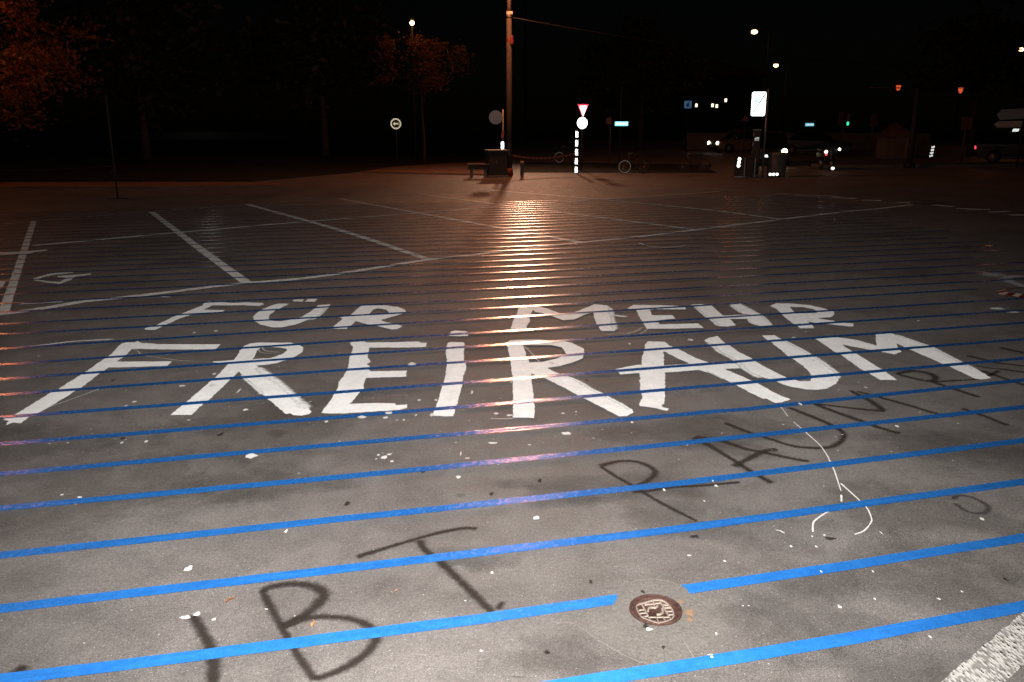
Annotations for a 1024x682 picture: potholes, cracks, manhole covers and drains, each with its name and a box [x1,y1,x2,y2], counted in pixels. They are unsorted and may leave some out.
manhole cover [629,594,682,626]
